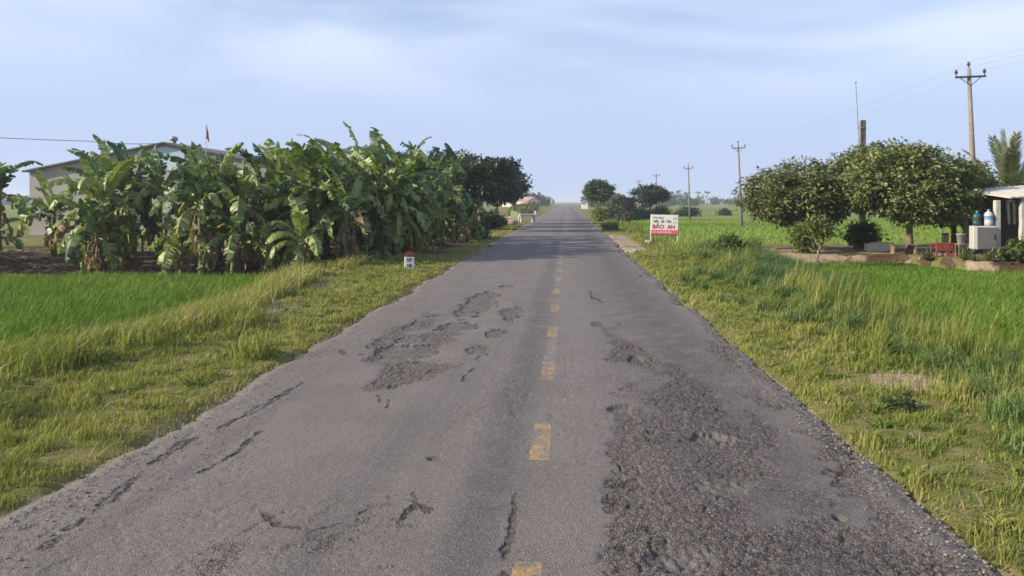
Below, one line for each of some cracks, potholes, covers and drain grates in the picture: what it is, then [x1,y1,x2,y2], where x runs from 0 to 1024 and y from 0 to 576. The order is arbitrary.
pothole [626,354,647,364]
crack [40,381,306,550]
pothole [483,328,509,338]
pothole [642,546,722,576]
pothole [465,342,491,361]
crack [174,491,435,576]
pothole [432,321,483,332]
pothole [451,290,504,321]
pothole [606,403,634,417]
crack [498,493,518,576]
pothole [491,306,528,323]
